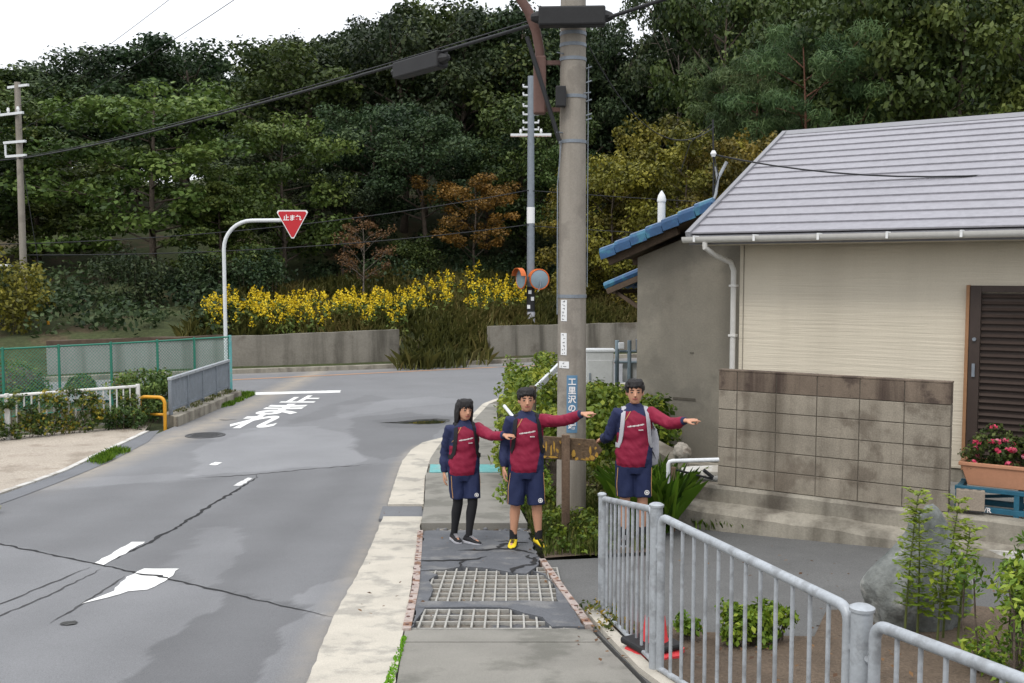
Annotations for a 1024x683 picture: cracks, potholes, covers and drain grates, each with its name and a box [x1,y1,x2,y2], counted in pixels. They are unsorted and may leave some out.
crack [419,540,539,572]
drain grate [411,609,577,629]
drain grate [429,567,560,601]
crack [0,475,331,622]
